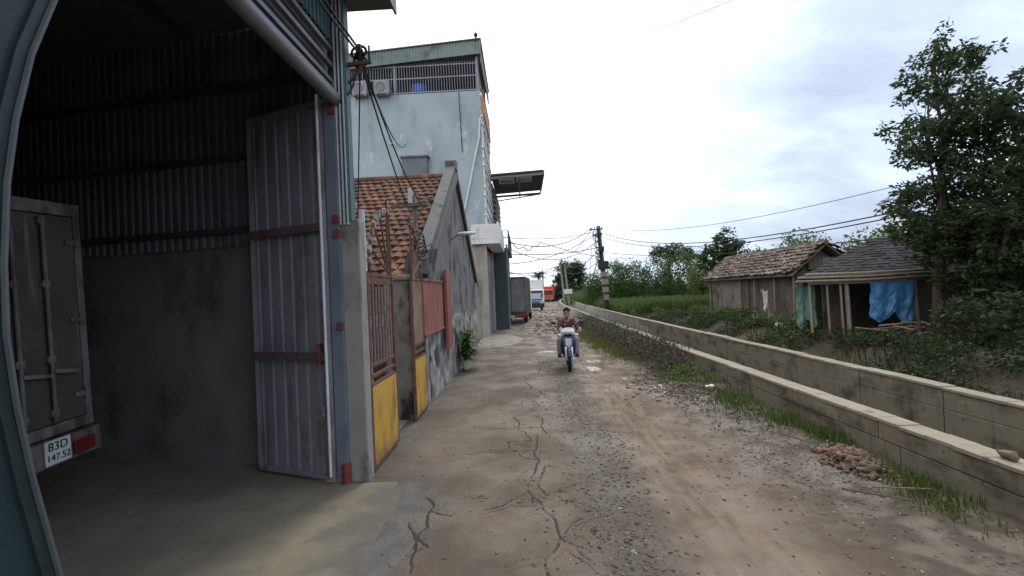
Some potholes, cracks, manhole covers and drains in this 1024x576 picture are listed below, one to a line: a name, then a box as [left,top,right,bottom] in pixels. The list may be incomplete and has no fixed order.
crack [385,368,627,576]
